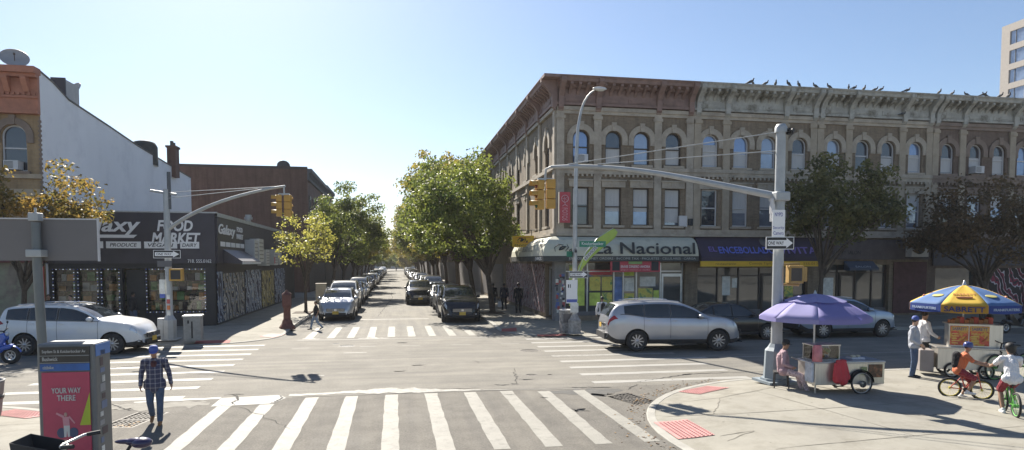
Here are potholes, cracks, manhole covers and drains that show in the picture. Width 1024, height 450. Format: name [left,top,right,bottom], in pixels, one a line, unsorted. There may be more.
crack [200,394,290,429]
